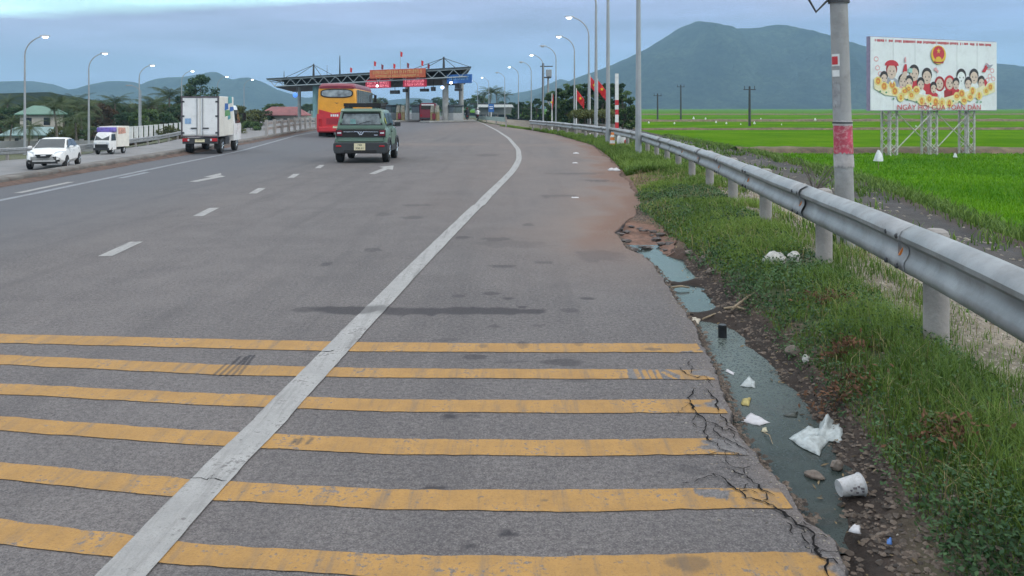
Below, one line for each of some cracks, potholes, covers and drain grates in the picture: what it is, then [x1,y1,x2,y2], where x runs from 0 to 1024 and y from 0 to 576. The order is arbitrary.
crack [676,360,838,576]
